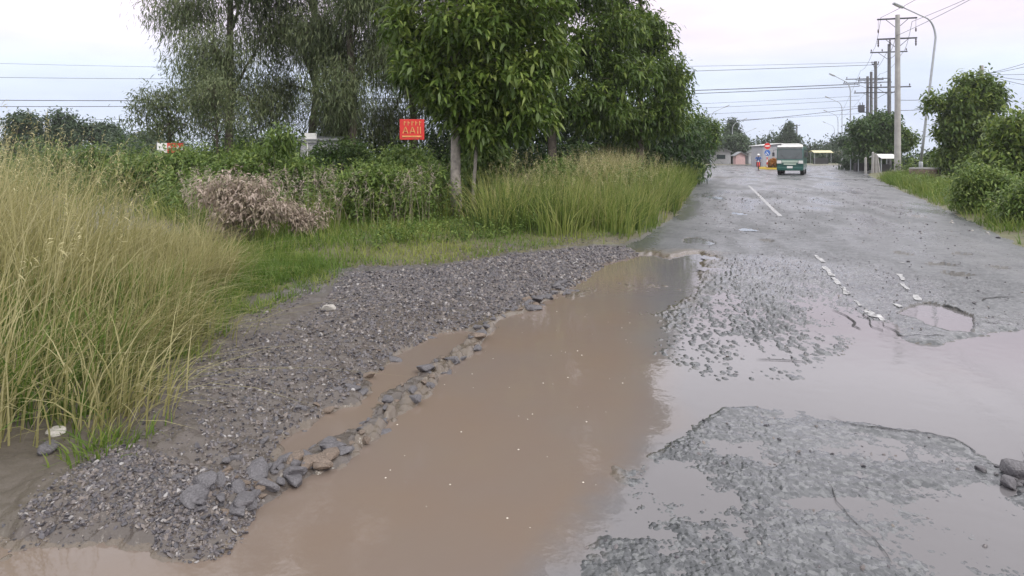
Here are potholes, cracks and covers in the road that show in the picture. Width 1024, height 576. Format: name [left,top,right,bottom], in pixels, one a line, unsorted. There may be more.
pothole [696,266,731,275]
pothole [229,254,704,576]
crack [834,306,939,336]
pothole [683,237,716,245]
crack [831,486,892,563]
pothole [569,281,1024,576]
